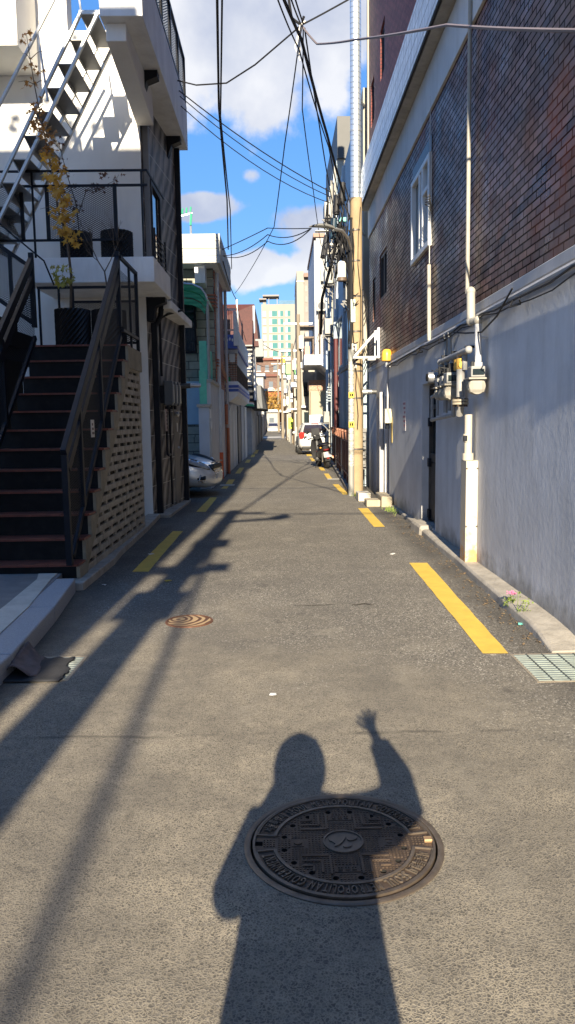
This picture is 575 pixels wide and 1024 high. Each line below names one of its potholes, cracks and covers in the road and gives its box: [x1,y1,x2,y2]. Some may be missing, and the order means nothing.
manhole cover [165,615,213,628]
drain grate [510,653,575,682]
manhole cover [244,794,444,907]
